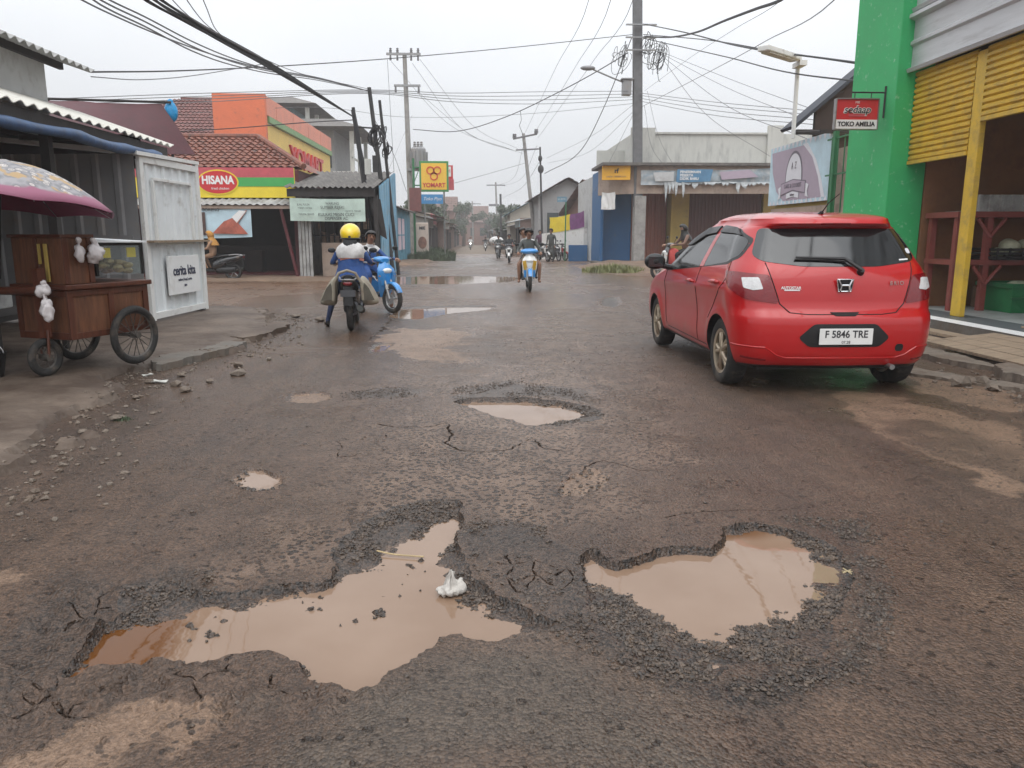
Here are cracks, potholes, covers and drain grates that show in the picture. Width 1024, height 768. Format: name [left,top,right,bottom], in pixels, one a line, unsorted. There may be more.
crack [63,591,112,631]
pothole [556,468,611,497]
pothole [283,391,334,403]
pothole [395,274,522,285]
crack [377,421,662,471]
crack [11,679,103,723]
pothole [579,522,857,687]
pothole [454,396,605,426]
pothole [61,499,555,692]
crack [493,554,574,597]
pothole [230,467,286,492]
pothole [385,305,496,321]
